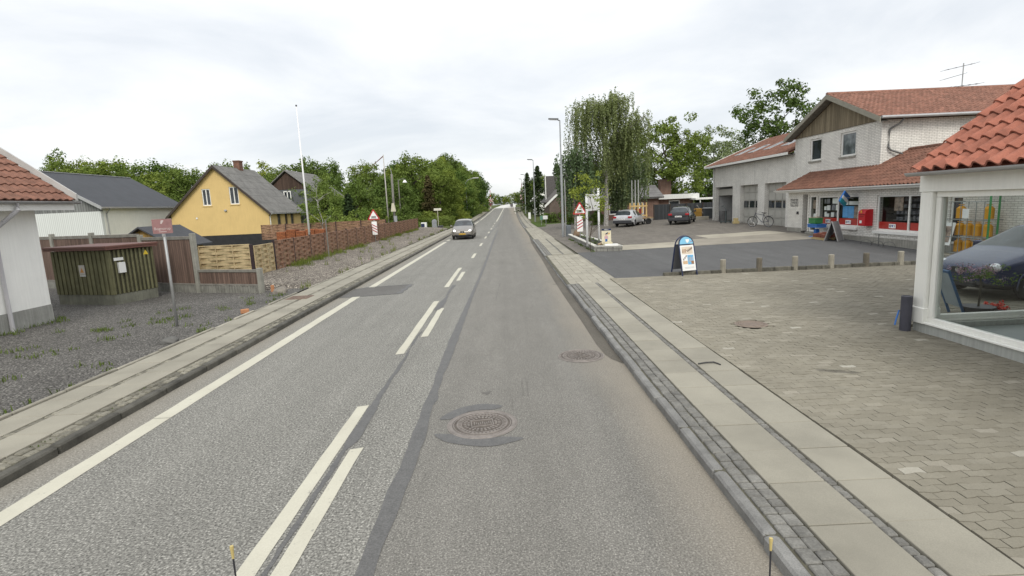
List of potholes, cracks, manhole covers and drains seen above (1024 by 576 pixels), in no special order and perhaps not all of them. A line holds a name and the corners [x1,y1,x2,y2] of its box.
manhole cover [734,320,768,328]
manhole cover [447,410,517,439]
manhole cover [558,349,604,362]
